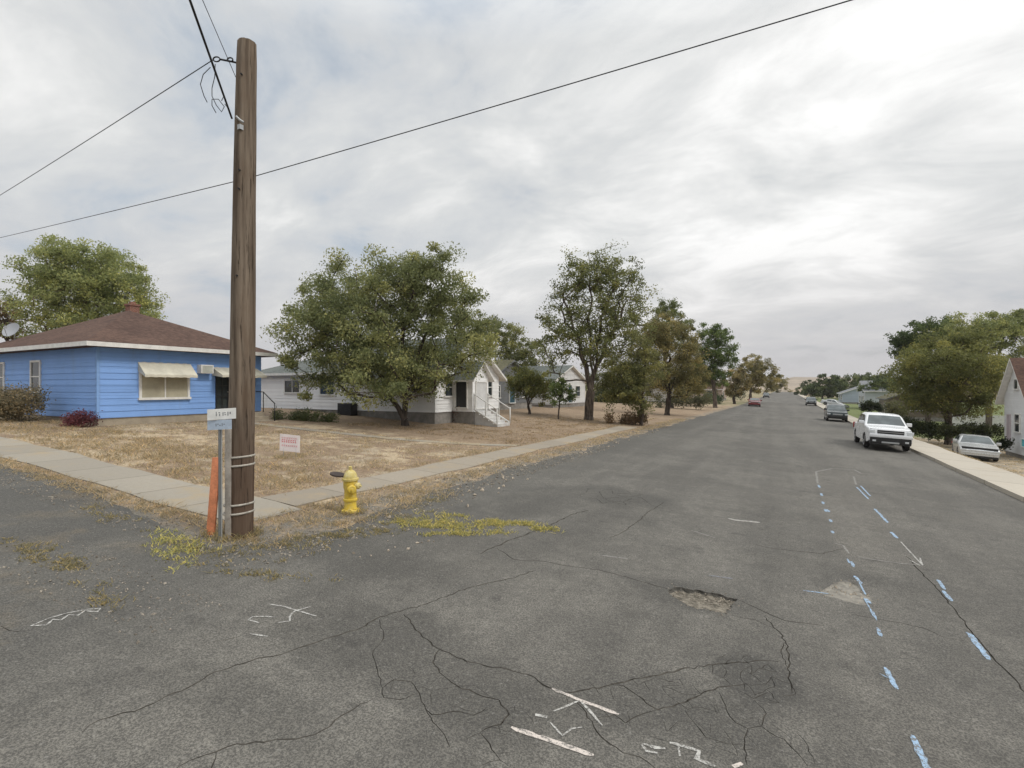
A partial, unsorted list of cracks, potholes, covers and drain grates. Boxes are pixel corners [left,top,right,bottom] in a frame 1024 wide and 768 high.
pothole [667,583,743,616]
crack [81,549,824,768]
